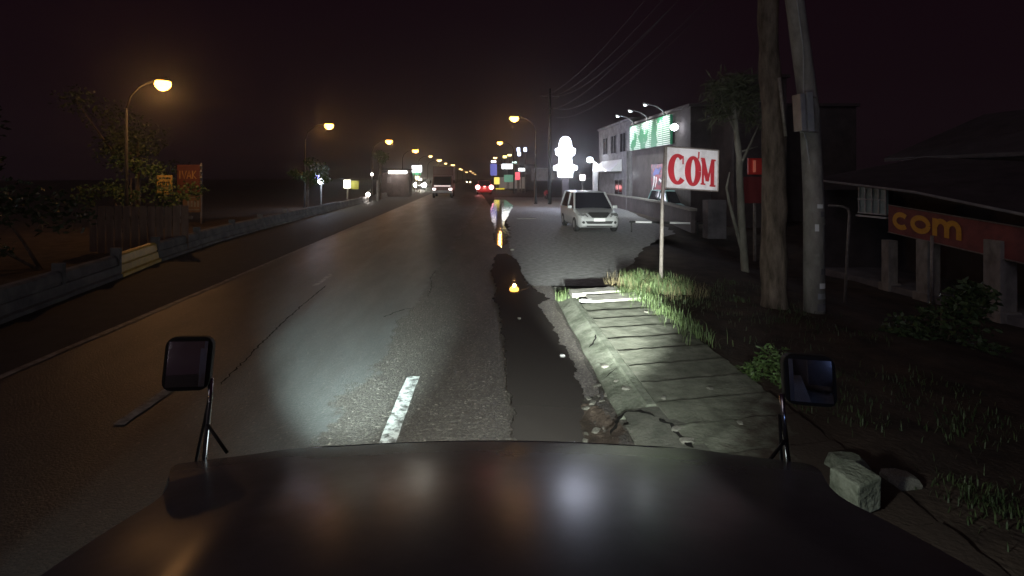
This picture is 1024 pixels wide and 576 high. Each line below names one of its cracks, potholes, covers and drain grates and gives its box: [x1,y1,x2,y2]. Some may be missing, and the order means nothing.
crack [610,410,694,448]
